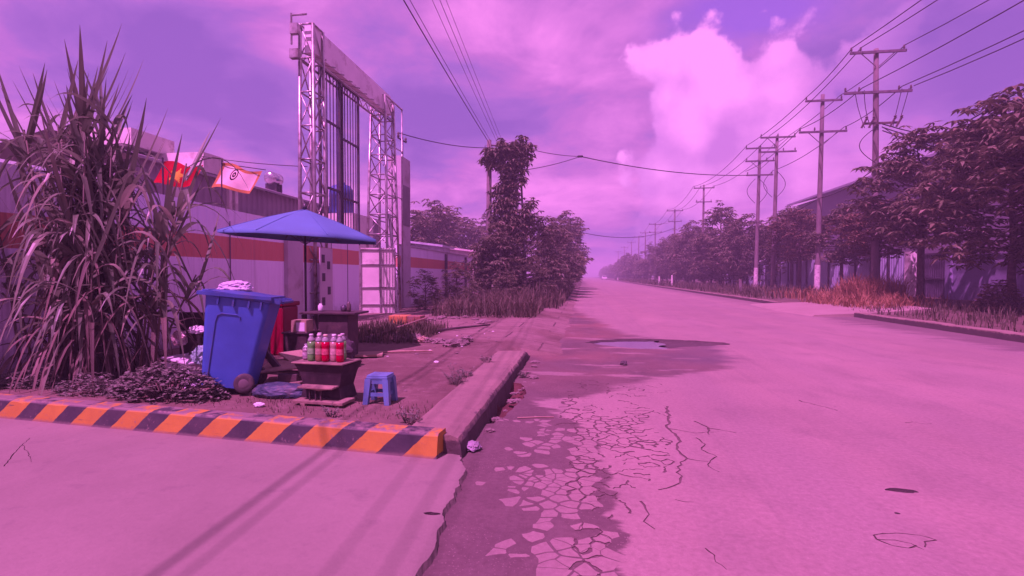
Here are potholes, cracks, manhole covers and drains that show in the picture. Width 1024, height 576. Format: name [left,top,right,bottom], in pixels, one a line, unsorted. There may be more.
pothole [586,339,730,349]
crack [555,380,735,576]
